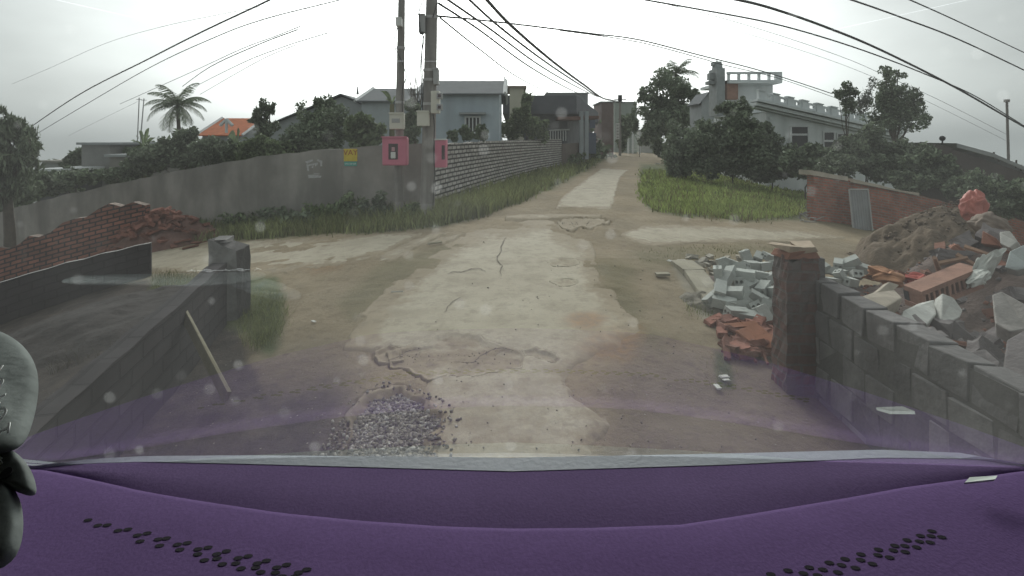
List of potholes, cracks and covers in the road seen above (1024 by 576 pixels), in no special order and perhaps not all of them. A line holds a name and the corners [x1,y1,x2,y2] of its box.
pothole [339,385,448,456]
pothole [522,347,560,363]
pothole [374,344,404,368]
pothole [385,330,525,383]
pothole [557,218,610,233]
